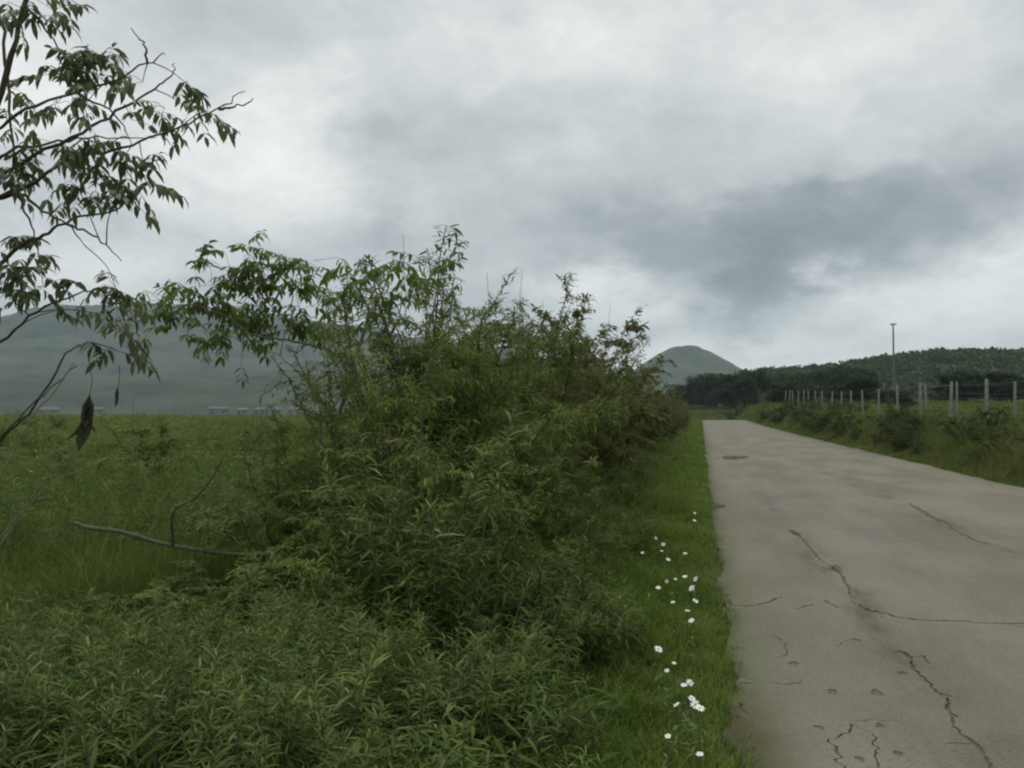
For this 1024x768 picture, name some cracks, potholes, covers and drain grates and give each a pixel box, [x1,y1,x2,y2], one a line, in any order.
crack [894,651,993,768]
crack [792,532,1024,627]
crack [726,597,781,606]
crack [908,503,999,546]
crack [826,719,907,768]
